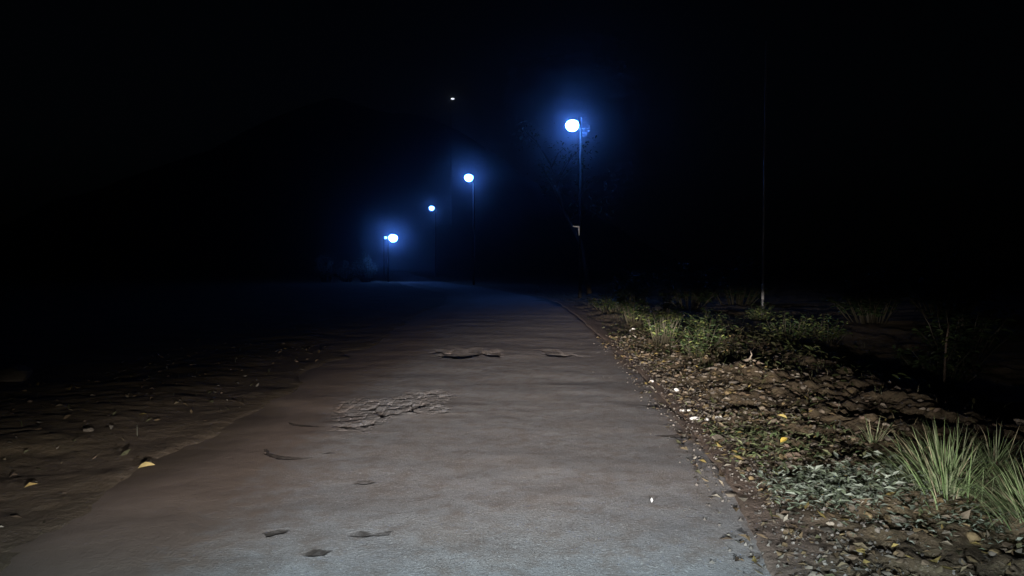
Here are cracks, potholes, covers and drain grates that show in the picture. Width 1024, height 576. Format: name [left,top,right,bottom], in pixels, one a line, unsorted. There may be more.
pothole [298,548,333,557]
pothole [262,528,291,538]
pothole [534,348,585,358]
pothole [346,529,396,538]
pothole [428,347,504,359]
